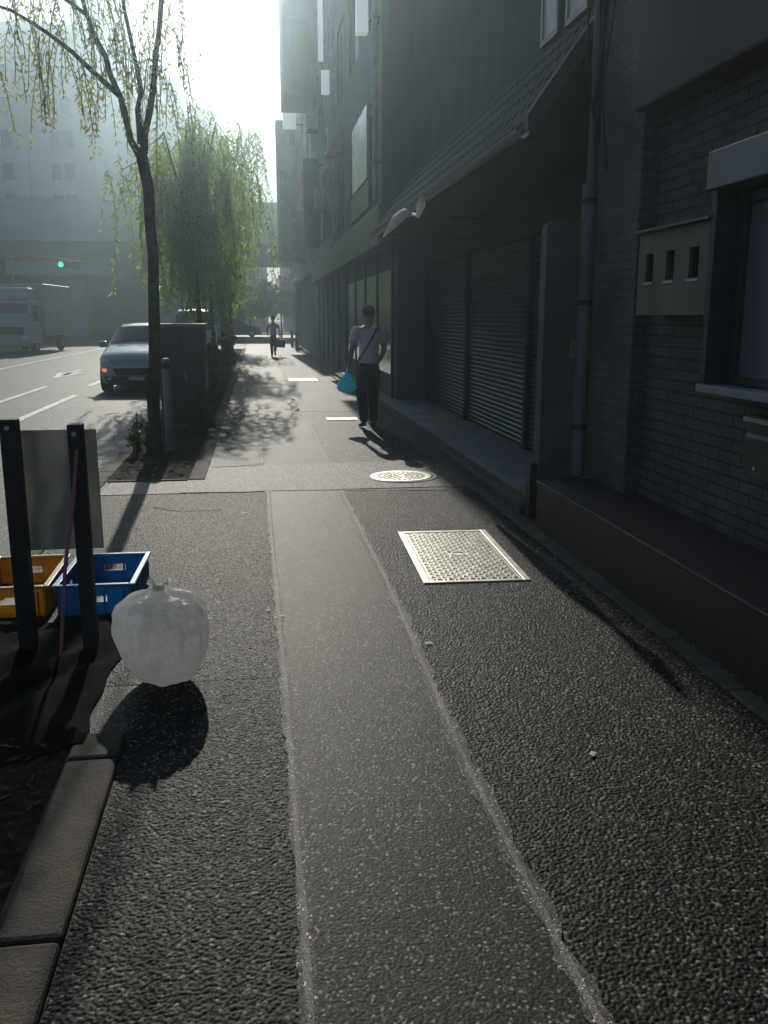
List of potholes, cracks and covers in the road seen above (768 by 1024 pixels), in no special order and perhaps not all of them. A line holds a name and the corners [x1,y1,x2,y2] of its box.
manhole cover [398,530,531,584]
manhole cover [364,470,439,483]
